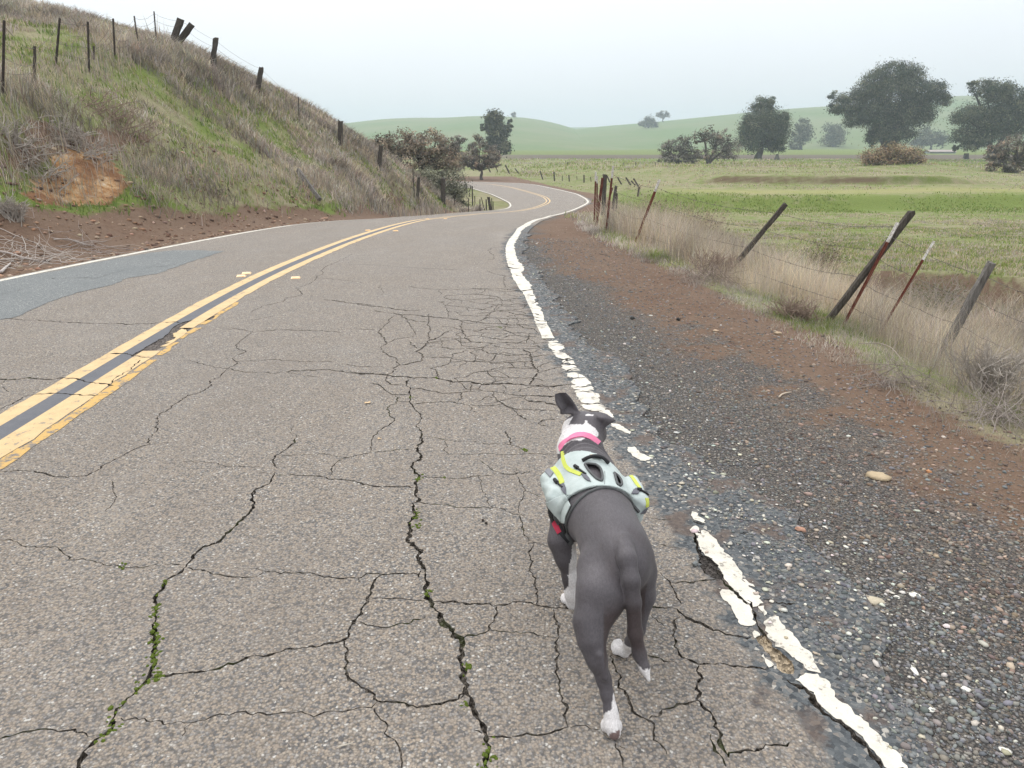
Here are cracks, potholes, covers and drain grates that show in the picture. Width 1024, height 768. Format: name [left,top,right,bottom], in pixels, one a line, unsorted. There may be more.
pothole [756,633,794,674]
crack [0,264,883,768]
